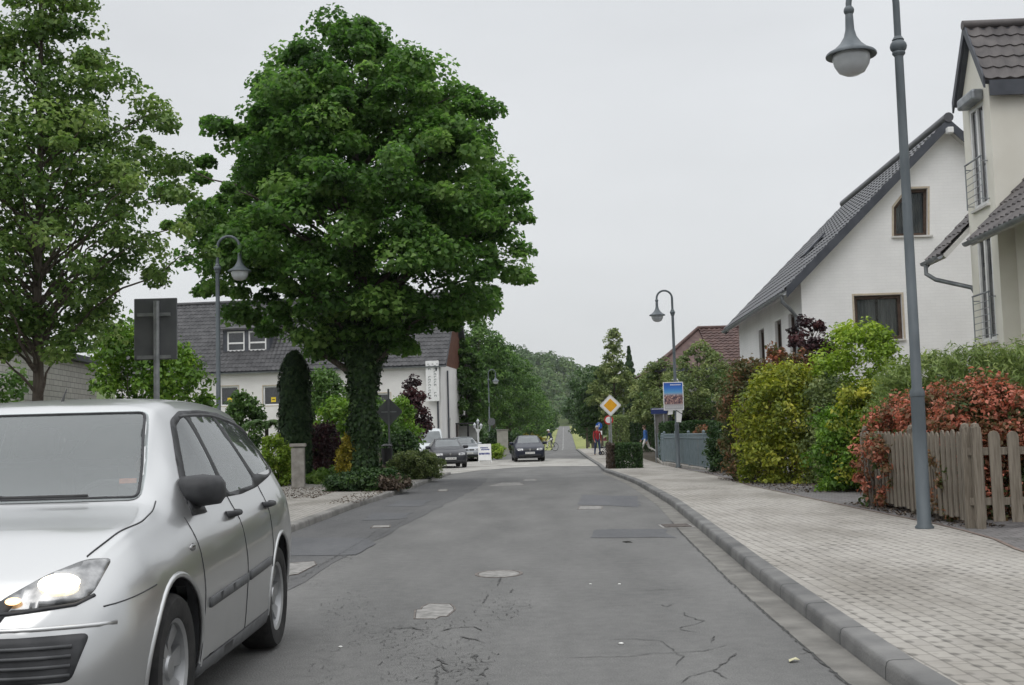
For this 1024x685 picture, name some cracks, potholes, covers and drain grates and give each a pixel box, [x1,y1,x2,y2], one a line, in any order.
crack [378,577,531,684]
crack [592,589,819,683]
manhole cover [475,570,523,578]
